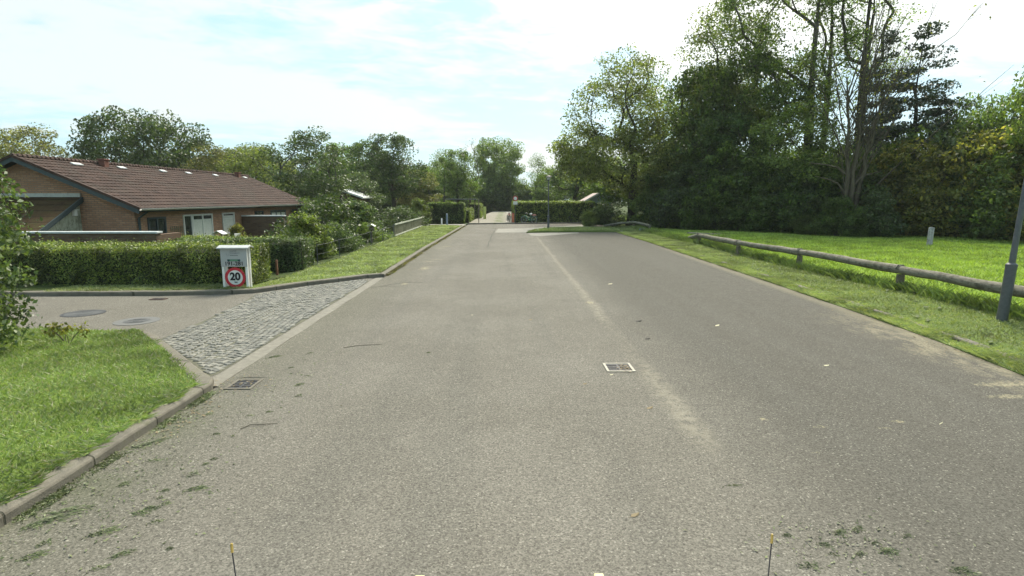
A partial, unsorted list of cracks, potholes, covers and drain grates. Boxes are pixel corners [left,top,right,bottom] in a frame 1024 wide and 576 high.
drain grate [223,379,263,390]
drain grate [602,363,636,372]
manhole cover [112,317,160,326]
